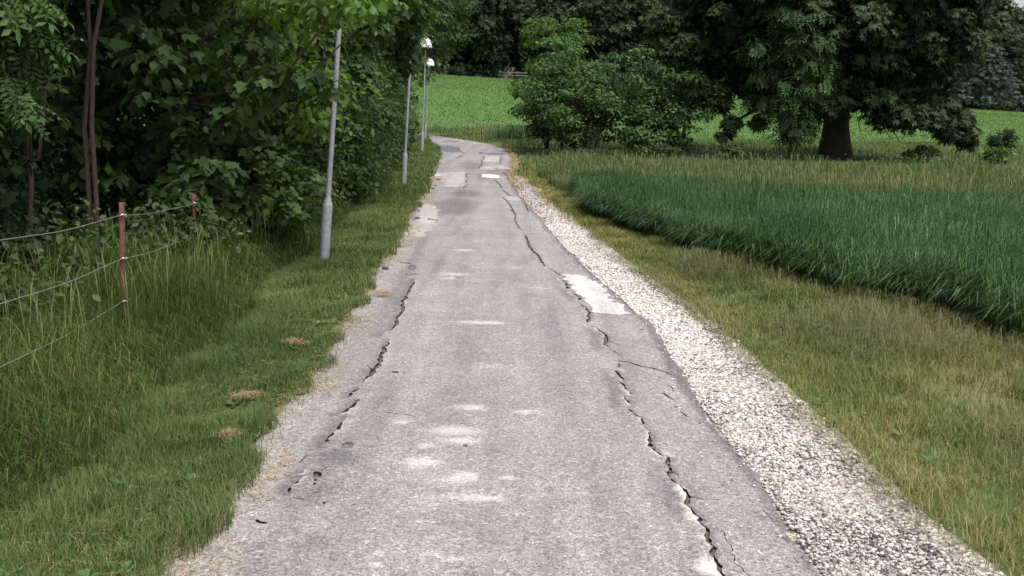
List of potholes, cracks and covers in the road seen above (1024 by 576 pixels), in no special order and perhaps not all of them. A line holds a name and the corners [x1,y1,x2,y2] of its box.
crack [456,148,750,576]
crack [287,261,416,500]
